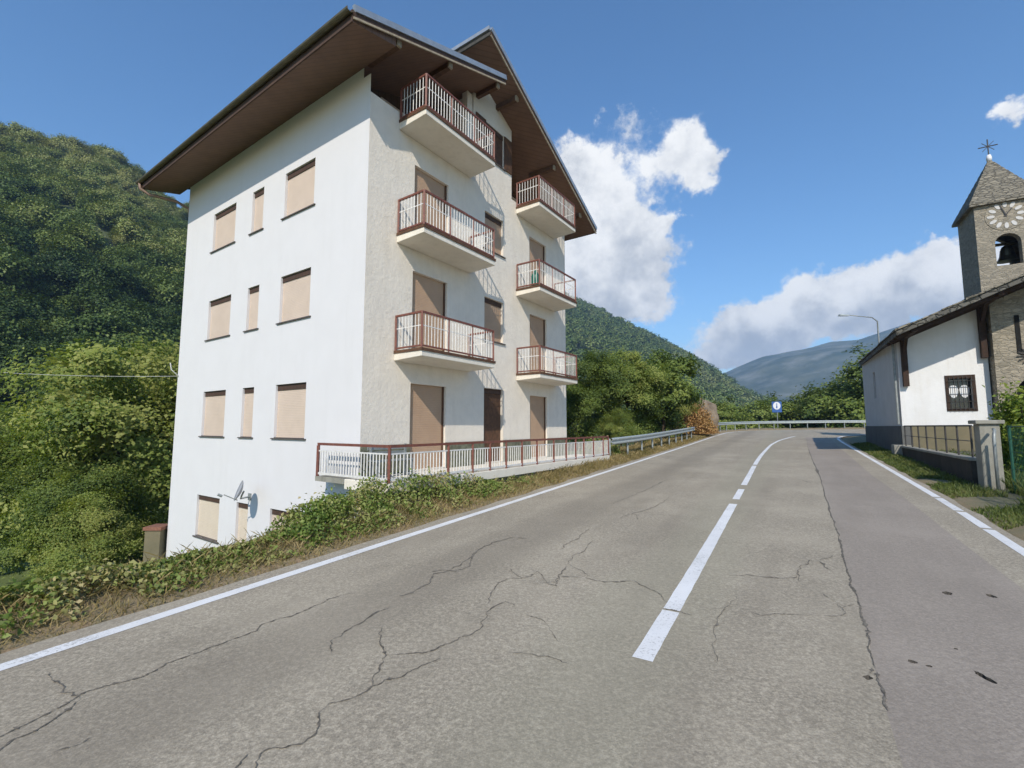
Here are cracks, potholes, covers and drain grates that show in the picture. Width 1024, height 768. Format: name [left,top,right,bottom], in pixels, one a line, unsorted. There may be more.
crack [0,593,351,750]
crack [729,440,888,710]
crack [235,529,690,768]
